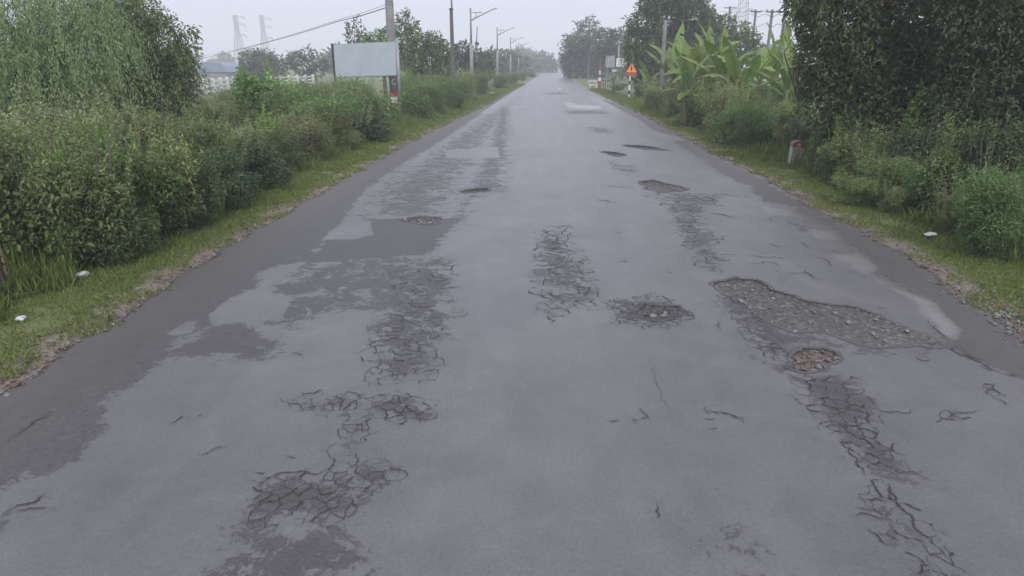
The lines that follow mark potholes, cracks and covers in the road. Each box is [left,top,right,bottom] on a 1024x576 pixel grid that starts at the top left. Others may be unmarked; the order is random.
pothole [629,303,694,321]
crack [647,191,752,268]
crack [246,389,439,529]
crack [528,225,608,324]
pothole [708,276,944,350]
pothole [639,179,690,193]
crack [786,374,965,576]
pothole [398,215,442,225]
crack [359,259,468,385]
pothole [781,345,844,374]
